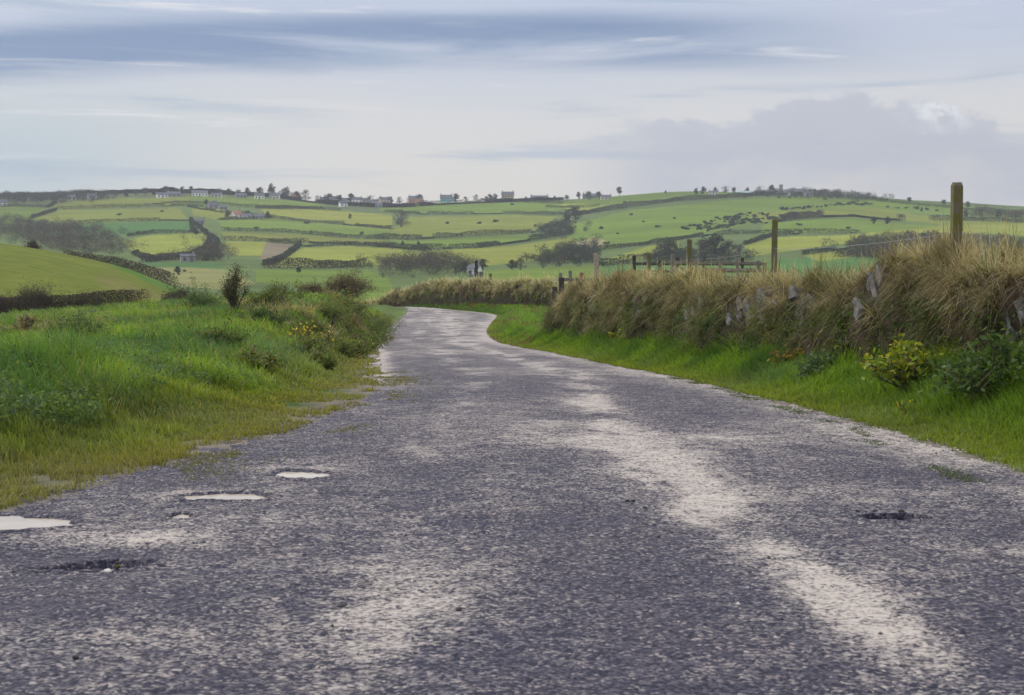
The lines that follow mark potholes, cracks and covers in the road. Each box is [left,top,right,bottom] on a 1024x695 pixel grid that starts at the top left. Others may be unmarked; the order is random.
pothole [11,557,174,574]
pothole [264,468,343,481]
pothole [0,512,113,534]
pothole [851,512,935,523]
pothole [164,511,196,521]
pothole [165,490,285,502]
